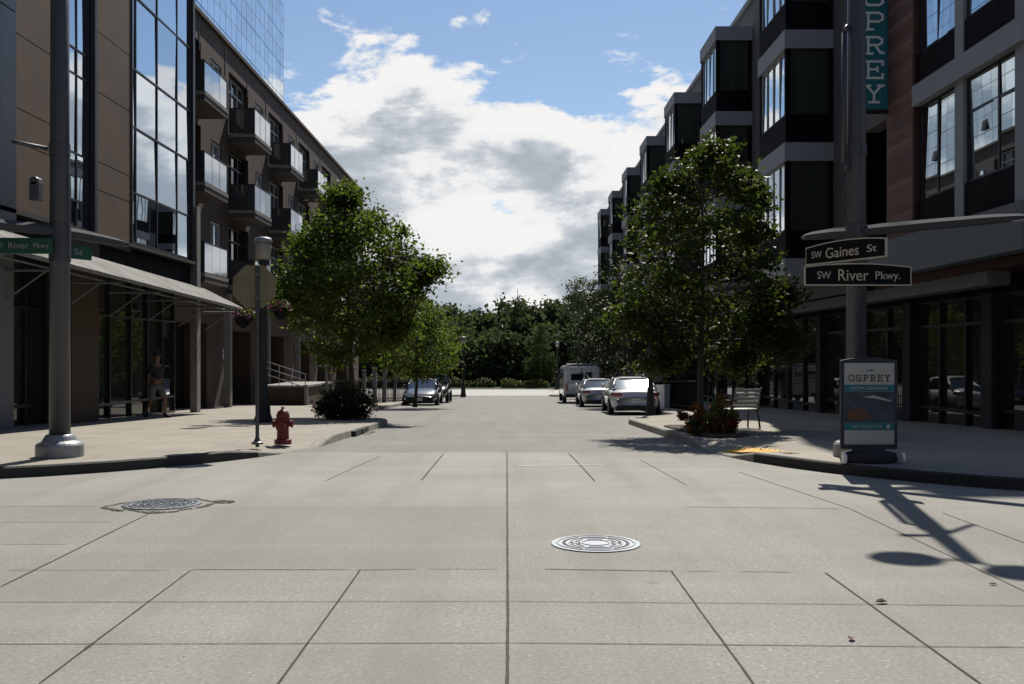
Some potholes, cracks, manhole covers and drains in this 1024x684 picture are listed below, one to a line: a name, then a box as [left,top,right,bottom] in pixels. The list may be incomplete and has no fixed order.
manhole cover [121,498,202,510]
manhole cover [551,535,641,553]
